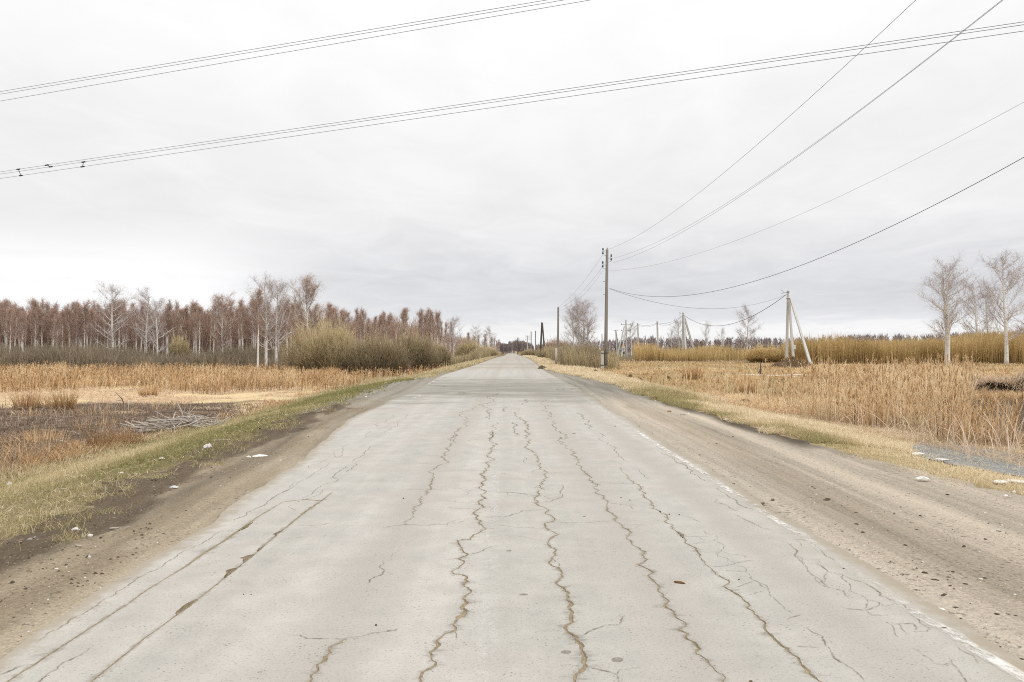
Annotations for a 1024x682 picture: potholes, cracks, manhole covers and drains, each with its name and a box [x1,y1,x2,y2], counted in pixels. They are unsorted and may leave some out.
crack [291,629,397,682]
crack [387,394,637,682]
crack [534,397,930,682]
crack [38,413,415,641]
